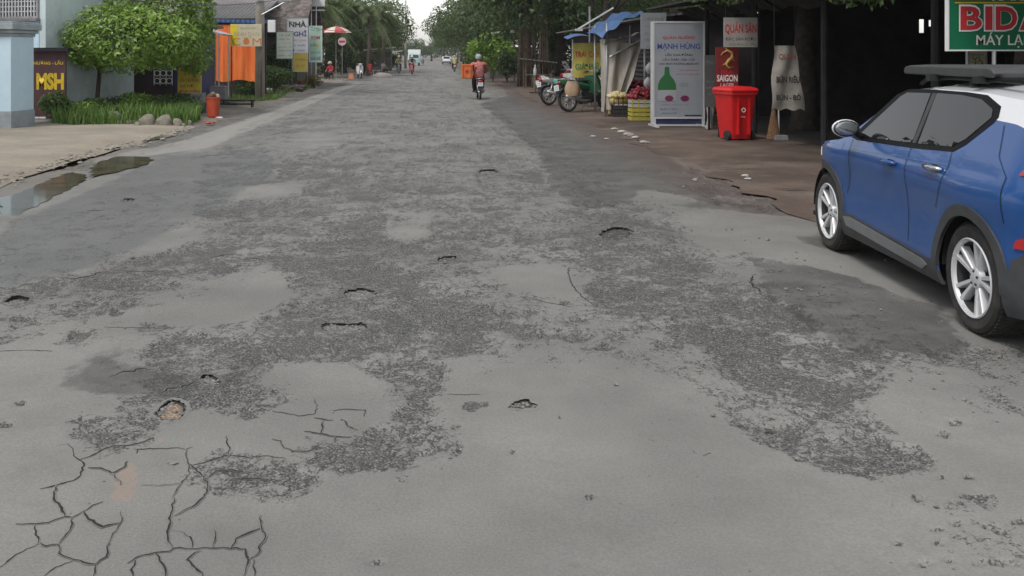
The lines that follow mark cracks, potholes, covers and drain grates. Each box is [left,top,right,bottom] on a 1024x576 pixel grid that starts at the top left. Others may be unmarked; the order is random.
pothole [504,397,543,411]
pothole [317,321,372,336]
crack [749,275,764,295]
crack [0,399,366,576]
pothole [196,372,225,387]
pothole [593,226,637,242]
pothole [0,294,34,307]
pothole [149,397,193,424]
crack [527,267,596,307]
pothole [433,255,462,264]
pothole [337,287,382,301]
